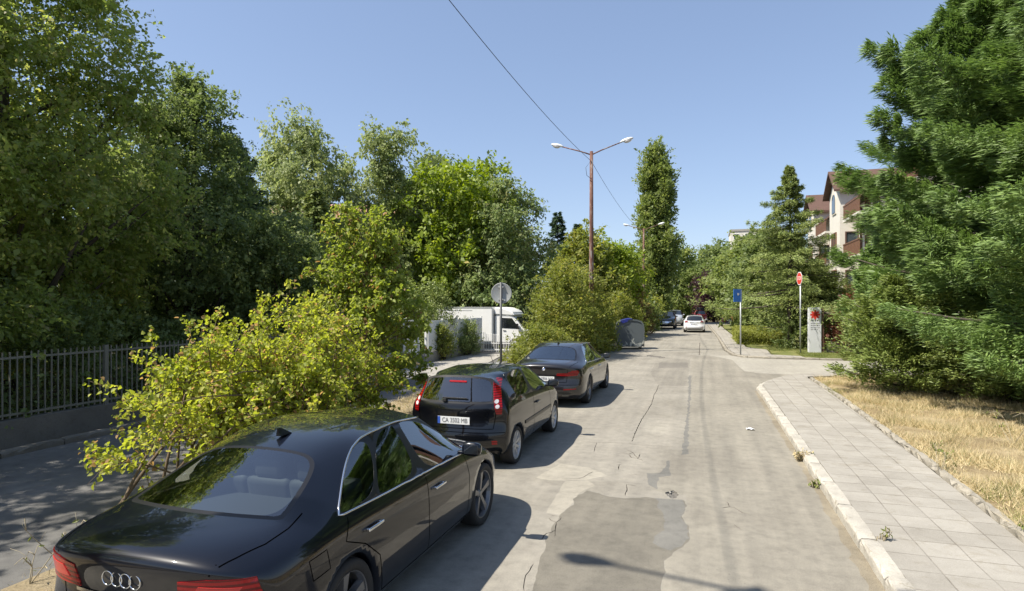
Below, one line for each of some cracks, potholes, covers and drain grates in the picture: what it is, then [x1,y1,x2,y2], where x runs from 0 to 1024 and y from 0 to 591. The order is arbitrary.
crack [594,380,672,495]
